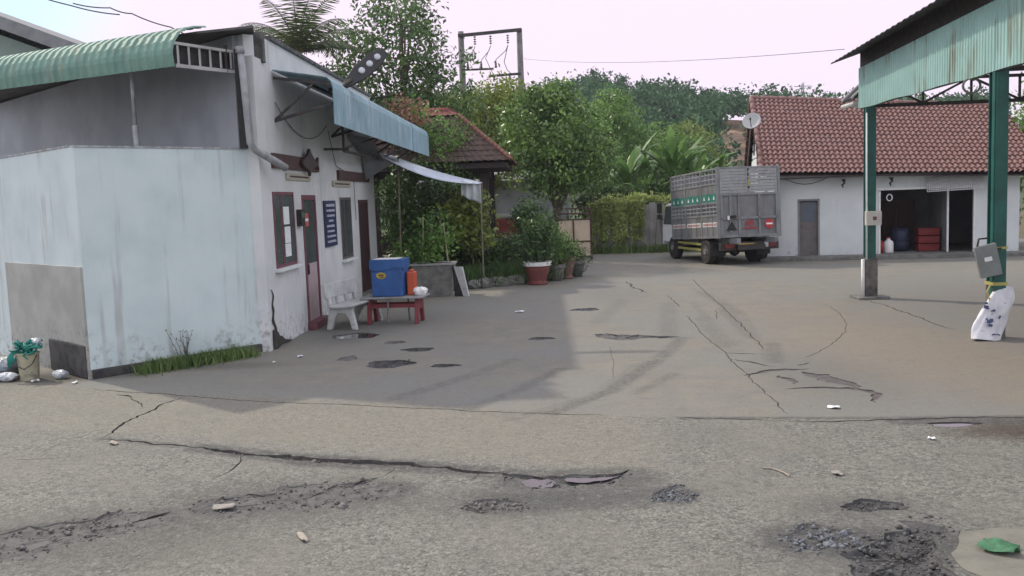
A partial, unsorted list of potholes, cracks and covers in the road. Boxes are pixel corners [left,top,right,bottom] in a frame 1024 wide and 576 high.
pothole [594,333,680,341]
pothole [836,515,960,576]
pothole [460,497,535,514]
crack [104,398,178,437]
pothole [651,483,700,503]
pothole [366,359,417,369]
pothole [839,498,909,512]
pothole [777,521,875,554]
crack [626,280,883,414]
